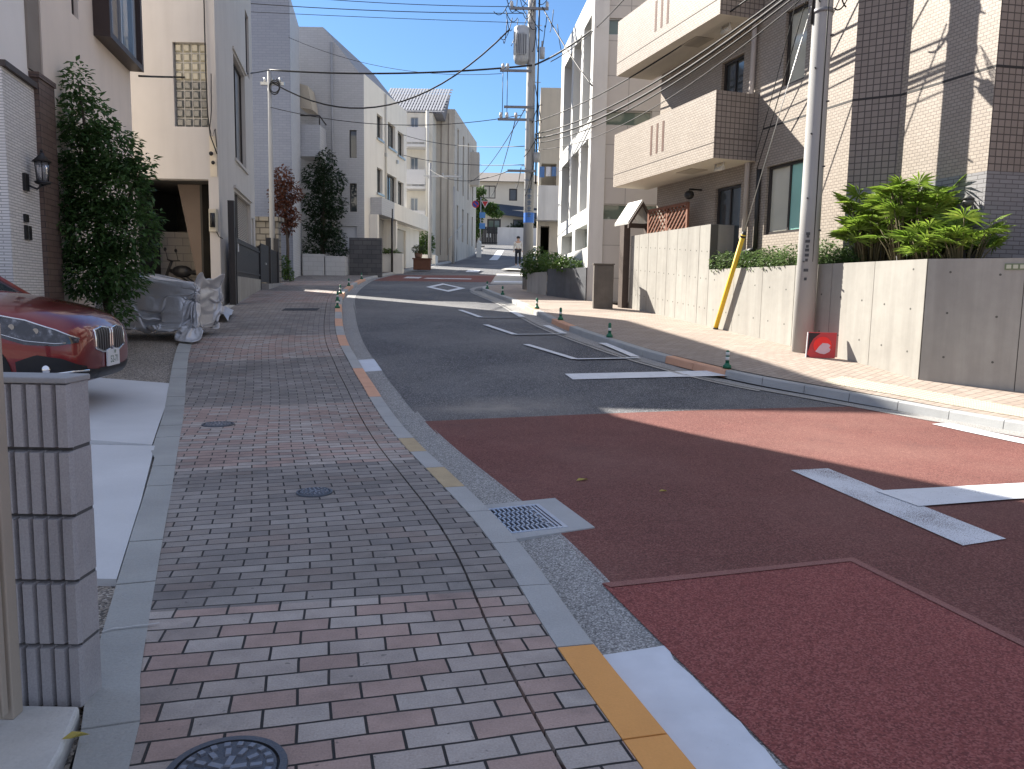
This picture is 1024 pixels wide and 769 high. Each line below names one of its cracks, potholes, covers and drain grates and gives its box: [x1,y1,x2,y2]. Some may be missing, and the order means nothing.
drain grate [485,498,595,542]
manhole cover [166,735,288,769]
manhole cover [296,487,333,498]
